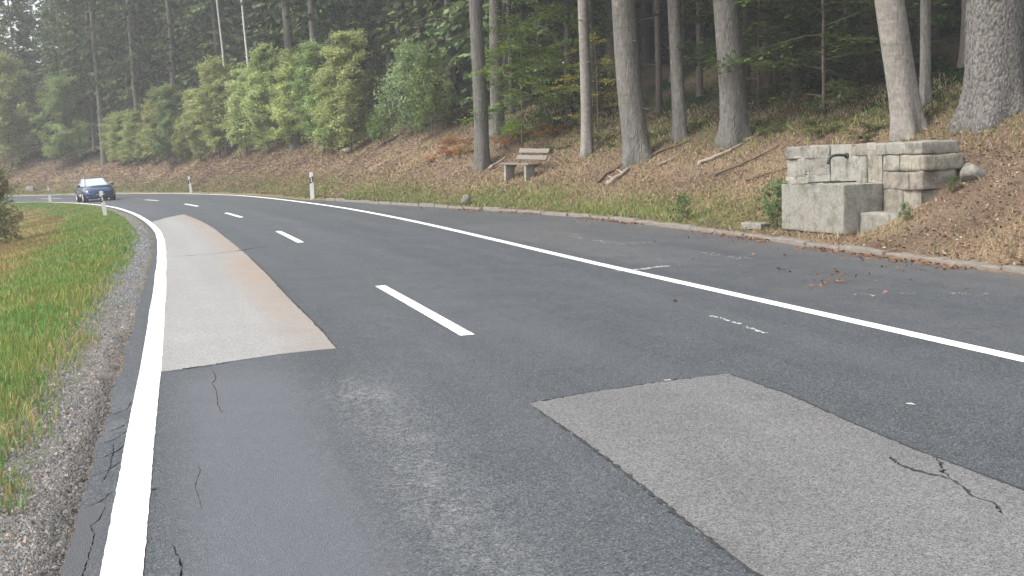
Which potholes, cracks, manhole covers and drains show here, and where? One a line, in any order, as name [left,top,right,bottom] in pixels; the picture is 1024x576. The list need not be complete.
crack [82,400,133,576]
crack [172,545,183,576]
crack [885,453,1004,515]
